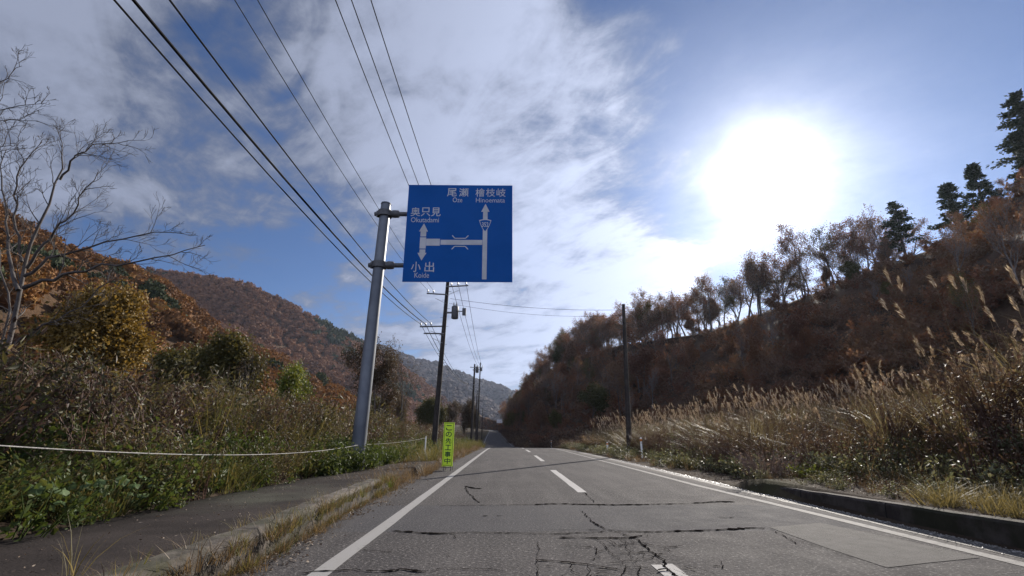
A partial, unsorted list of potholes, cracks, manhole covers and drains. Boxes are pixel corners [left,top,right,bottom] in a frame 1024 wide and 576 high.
crack [393,486,853,576]
